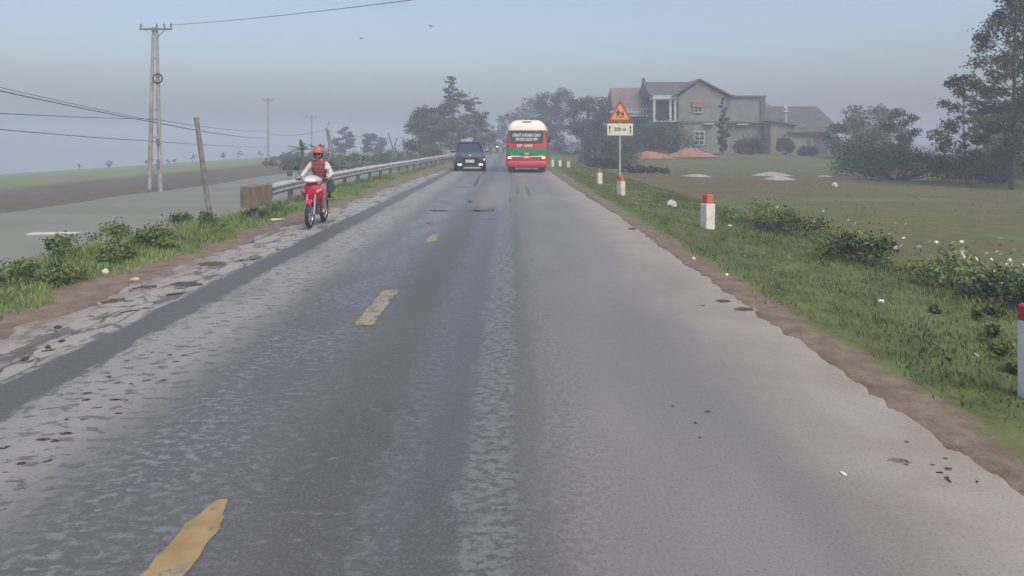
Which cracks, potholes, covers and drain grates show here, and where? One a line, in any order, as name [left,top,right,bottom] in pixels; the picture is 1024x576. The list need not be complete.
crack [224,231,290,261]
crack [77,288,188,323]
pothole [881,456,916,468]
crack [458,169,489,188]
